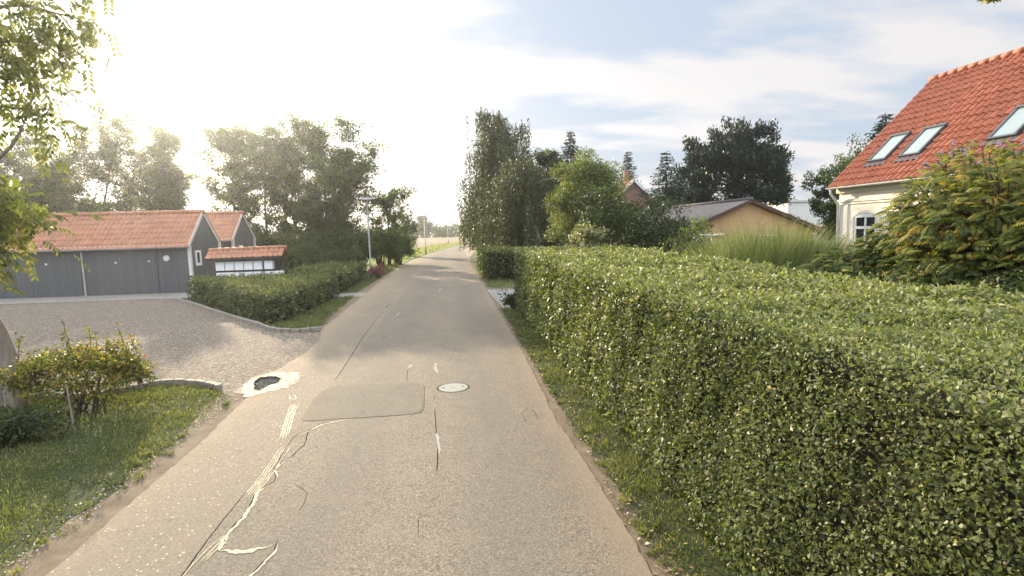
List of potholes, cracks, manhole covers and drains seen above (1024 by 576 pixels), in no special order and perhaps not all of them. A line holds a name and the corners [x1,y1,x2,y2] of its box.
pothole [253,376,281,390]
manhole cover [436,383,471,393]
crack [195,421,332,570]
